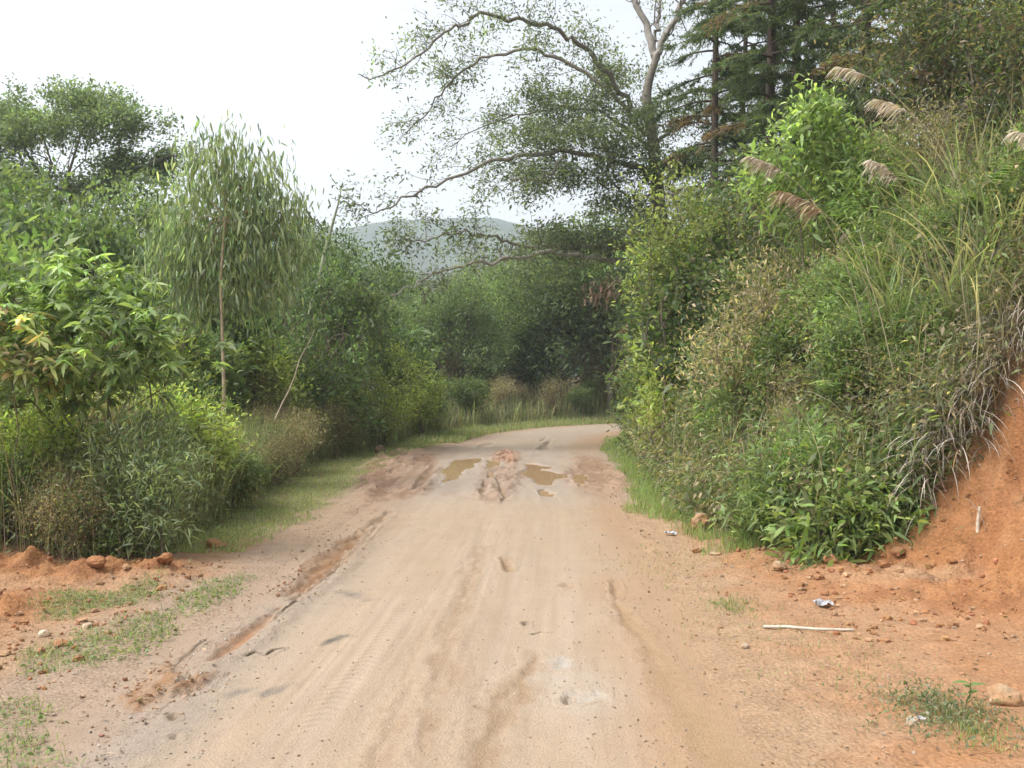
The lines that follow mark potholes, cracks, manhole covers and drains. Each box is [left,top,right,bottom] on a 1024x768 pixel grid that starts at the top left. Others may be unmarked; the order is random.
pothole [438,457,485,486]
pothole [516,462,571,486]
pothole [495,556,520,573]
pothole [567,474,589,485]
pothole [535,488,558,497]
